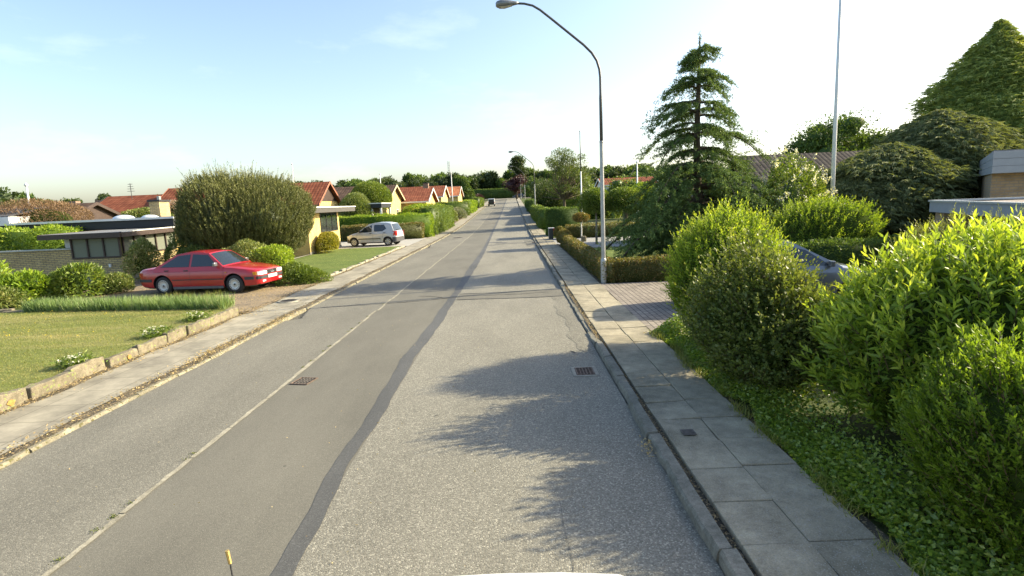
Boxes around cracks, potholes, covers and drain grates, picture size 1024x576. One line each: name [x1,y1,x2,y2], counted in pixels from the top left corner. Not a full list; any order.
drain grate [290,377,318,385]
drain grate [571,366,600,377]
